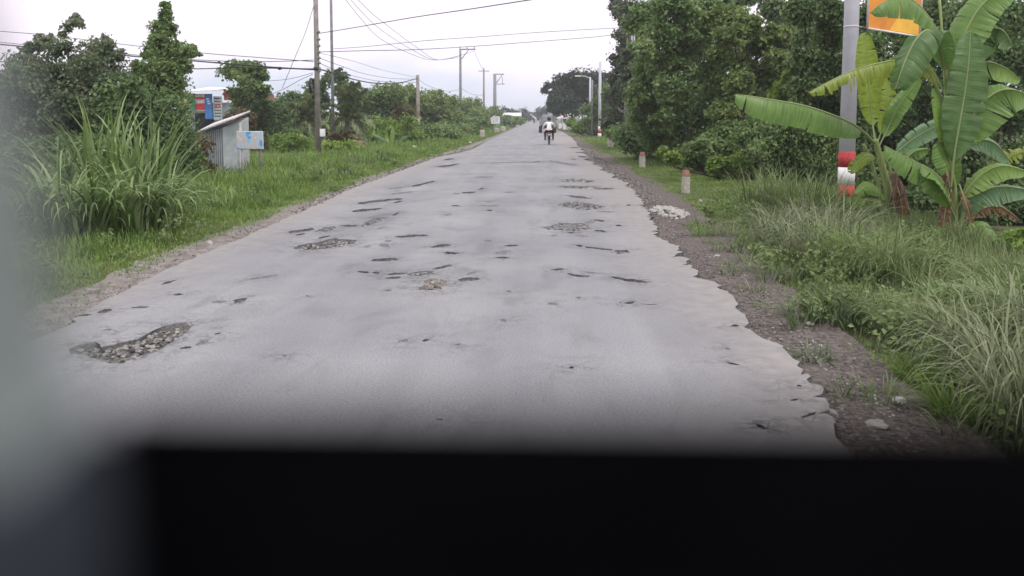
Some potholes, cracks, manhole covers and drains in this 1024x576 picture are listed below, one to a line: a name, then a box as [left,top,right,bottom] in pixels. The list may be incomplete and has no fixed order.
pothole [558,202,605,210]
pothole [294,238,357,250]
pothole [72,322,192,363]
pothole [419,278,447,290]
pothole [543,223,589,232]
